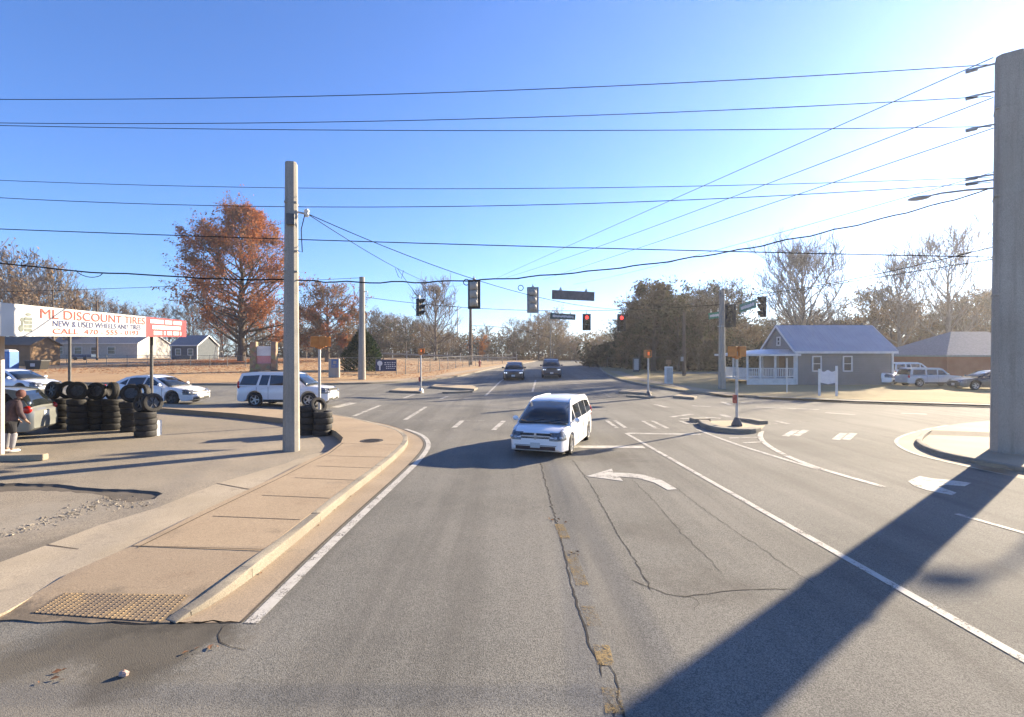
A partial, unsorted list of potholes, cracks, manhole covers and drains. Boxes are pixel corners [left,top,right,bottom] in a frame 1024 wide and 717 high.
crack [540,463,625,717]
